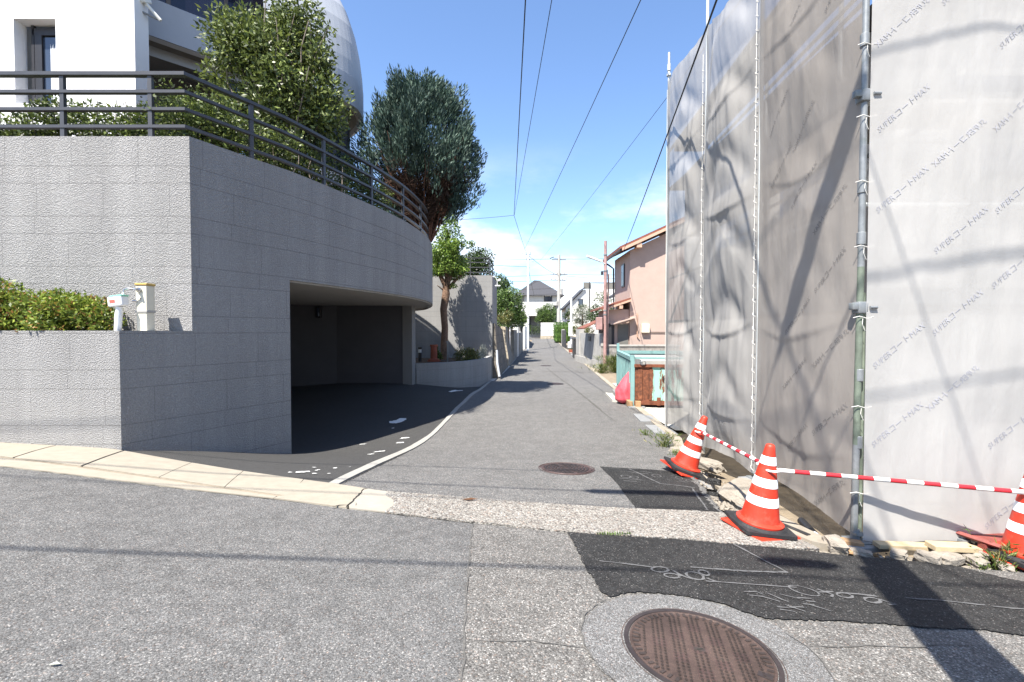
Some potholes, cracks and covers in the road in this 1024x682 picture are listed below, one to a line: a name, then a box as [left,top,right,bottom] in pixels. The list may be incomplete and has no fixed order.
manhole cover [538,462,595,475]
manhole cover [621,608,788,682]
